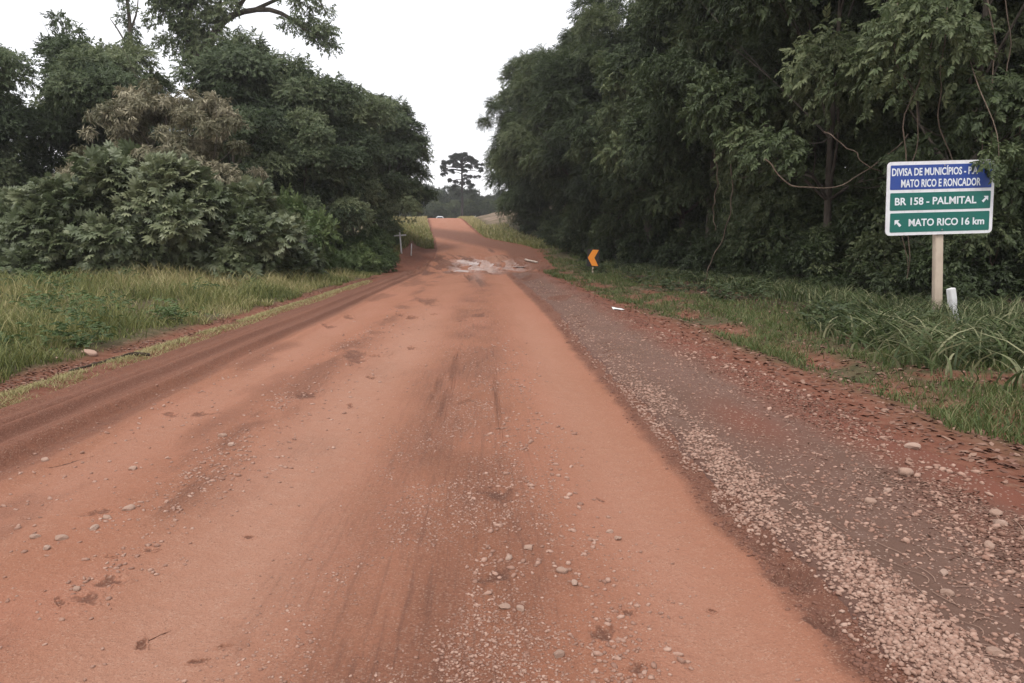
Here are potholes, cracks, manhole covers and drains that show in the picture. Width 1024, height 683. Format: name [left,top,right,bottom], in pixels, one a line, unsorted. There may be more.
pothole [475,485,525,509]
pothole [338,345,370,373]
